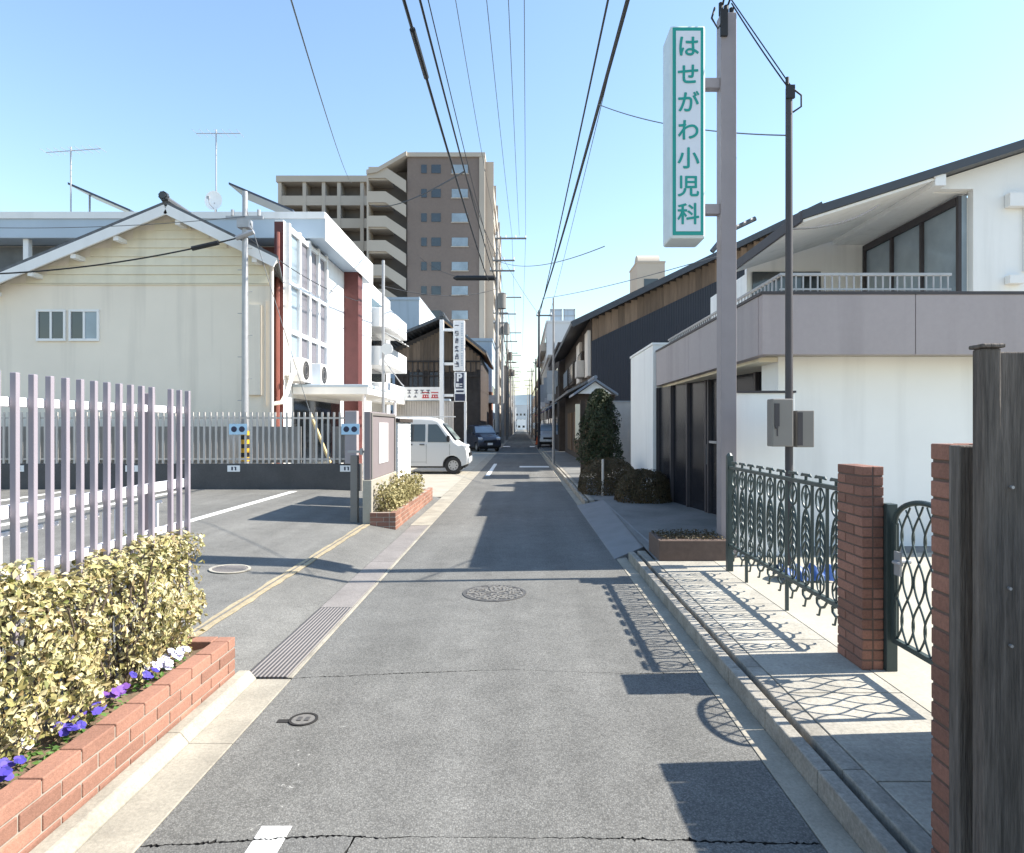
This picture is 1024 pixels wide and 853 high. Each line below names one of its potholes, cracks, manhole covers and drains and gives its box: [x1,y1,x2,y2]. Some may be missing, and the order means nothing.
manhole cover [463,585,526,602]
crack [294,669,686,679]
manhole cover [276,712,318,726]
crack [140,835,821,853]
manhole cover [209,564,251,574]
